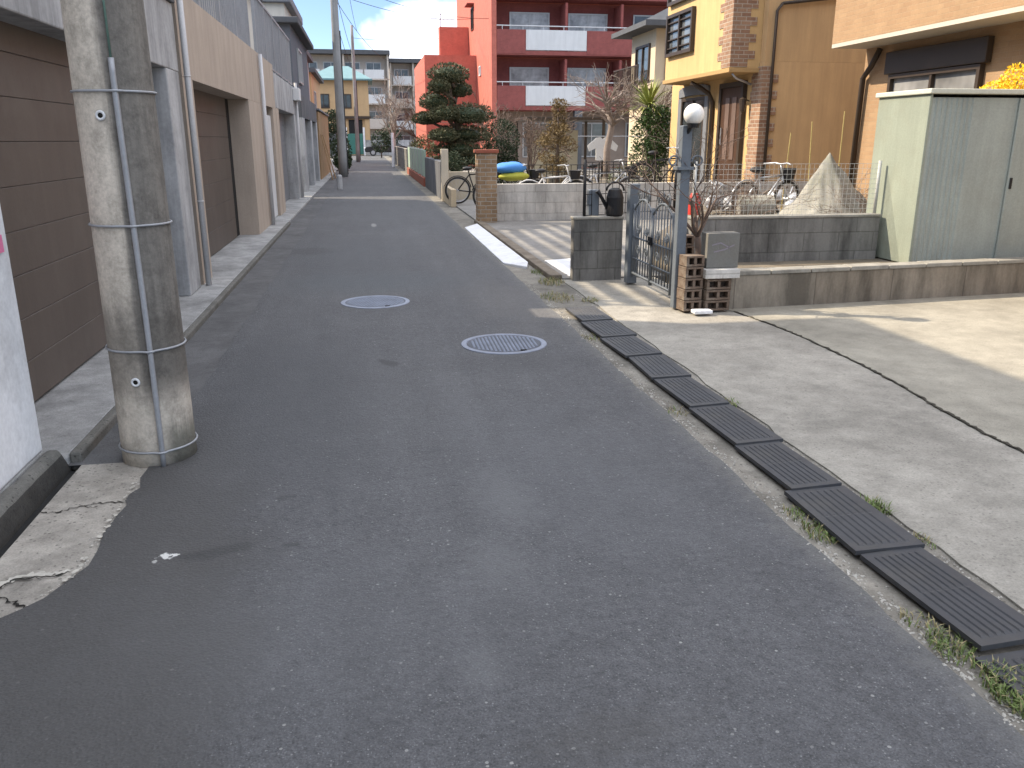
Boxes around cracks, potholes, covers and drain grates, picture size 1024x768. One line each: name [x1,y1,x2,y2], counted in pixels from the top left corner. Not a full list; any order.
crack [38,501,124,513]
manhole cover [341,295,410,309]
crack [0,569,71,608]
manhole cover [461,334,547,354]
crack [736,311,1024,452]
